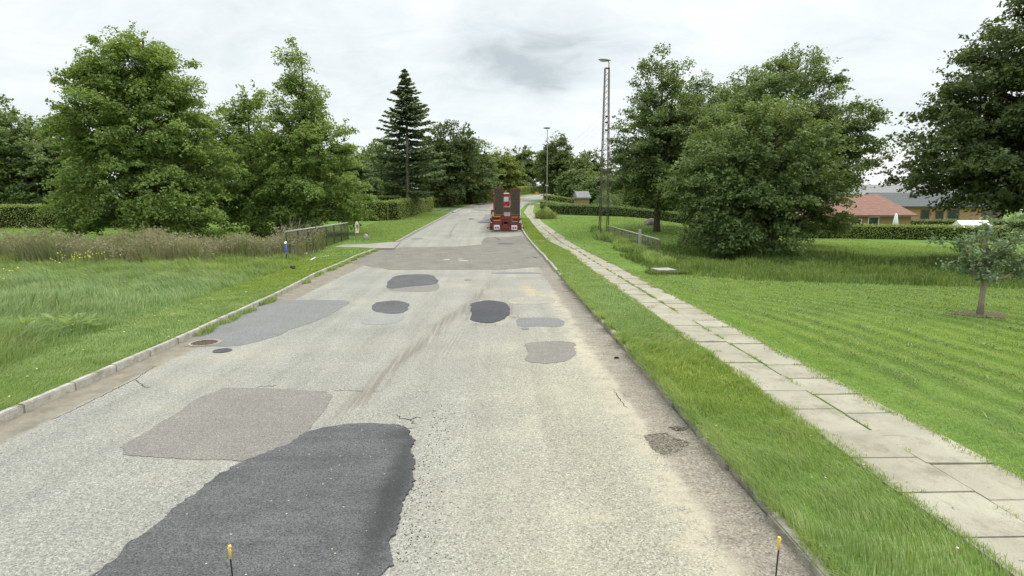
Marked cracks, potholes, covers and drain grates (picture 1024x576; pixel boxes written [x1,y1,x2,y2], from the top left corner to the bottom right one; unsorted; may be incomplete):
pothole [644,433,690,455]
manhole cover [188,339,221,347]
